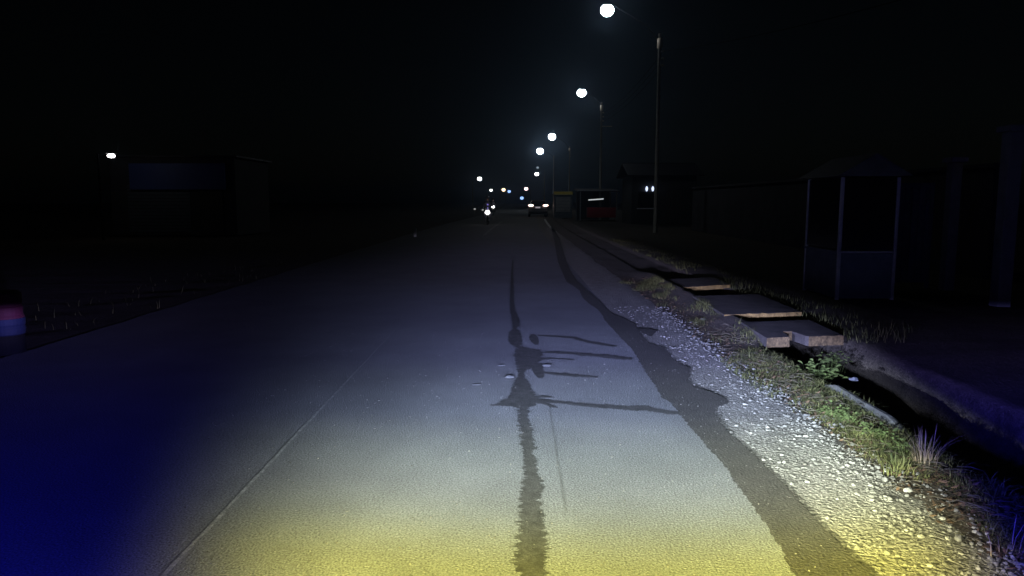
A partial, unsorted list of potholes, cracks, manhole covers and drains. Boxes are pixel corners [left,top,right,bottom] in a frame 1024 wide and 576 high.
crack [490,260,679,576]
